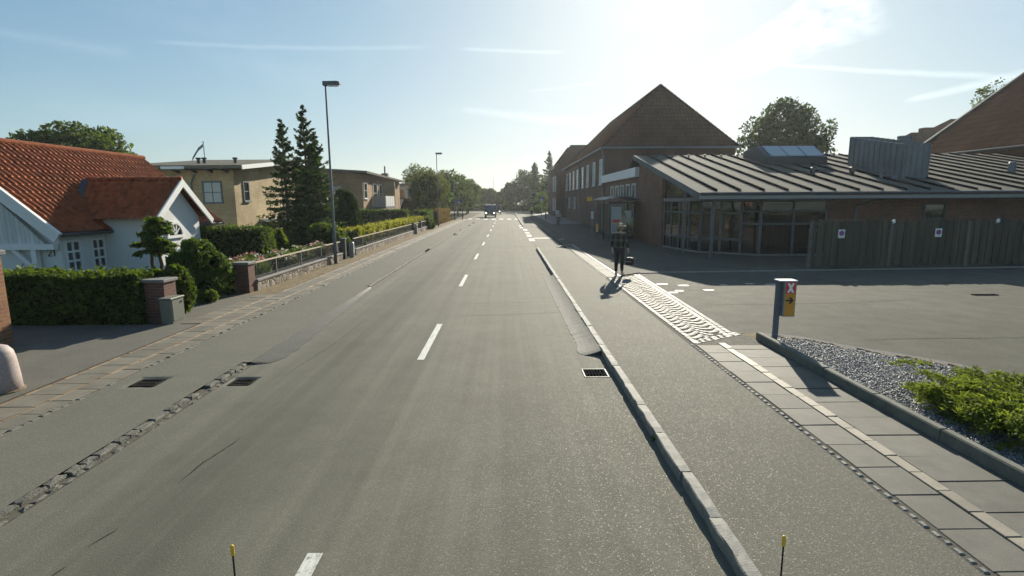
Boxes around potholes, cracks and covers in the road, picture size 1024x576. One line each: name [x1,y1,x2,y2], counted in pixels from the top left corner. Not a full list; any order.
crack [183,437,241,479]
drain grate [581,369,610,378]
drain grate [128,379,167,388]
